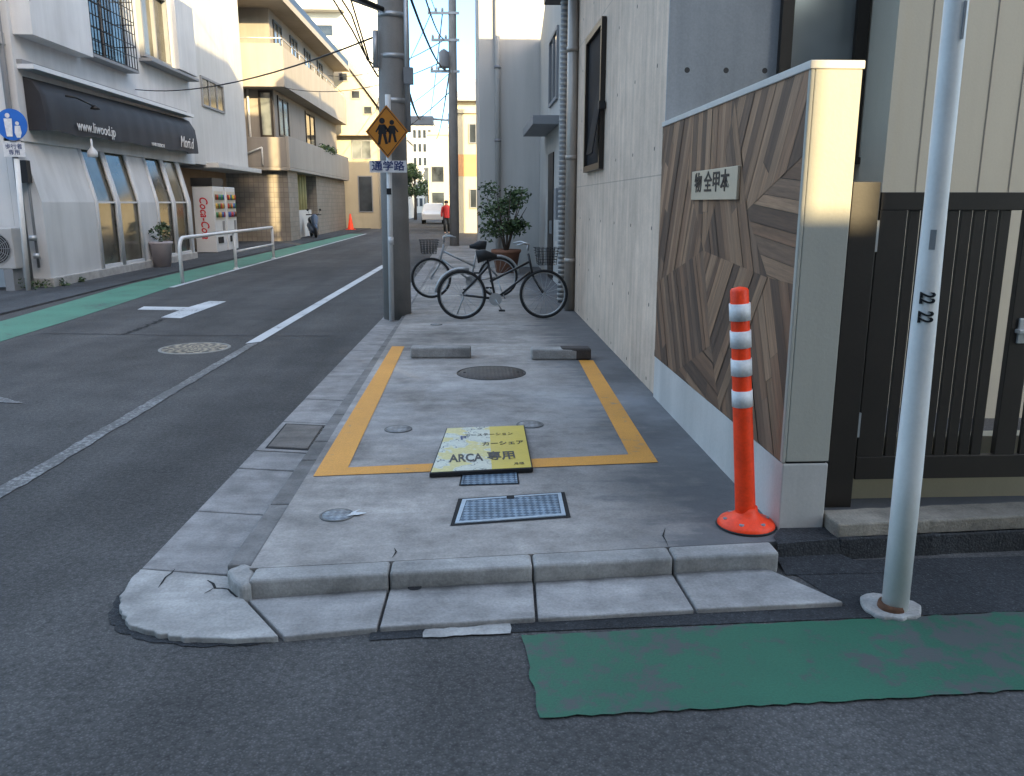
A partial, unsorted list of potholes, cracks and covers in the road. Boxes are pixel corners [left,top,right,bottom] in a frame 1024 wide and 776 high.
manhole cover [319,508,354,522]
manhole cover [158,342,231,355]
manhole cover [384,425,412,433]
manhole cover [457,366,526,380]
manhole cover [459,473,519,486]
manhole cover [450,492,571,526]
crack [205,580,238,597]
